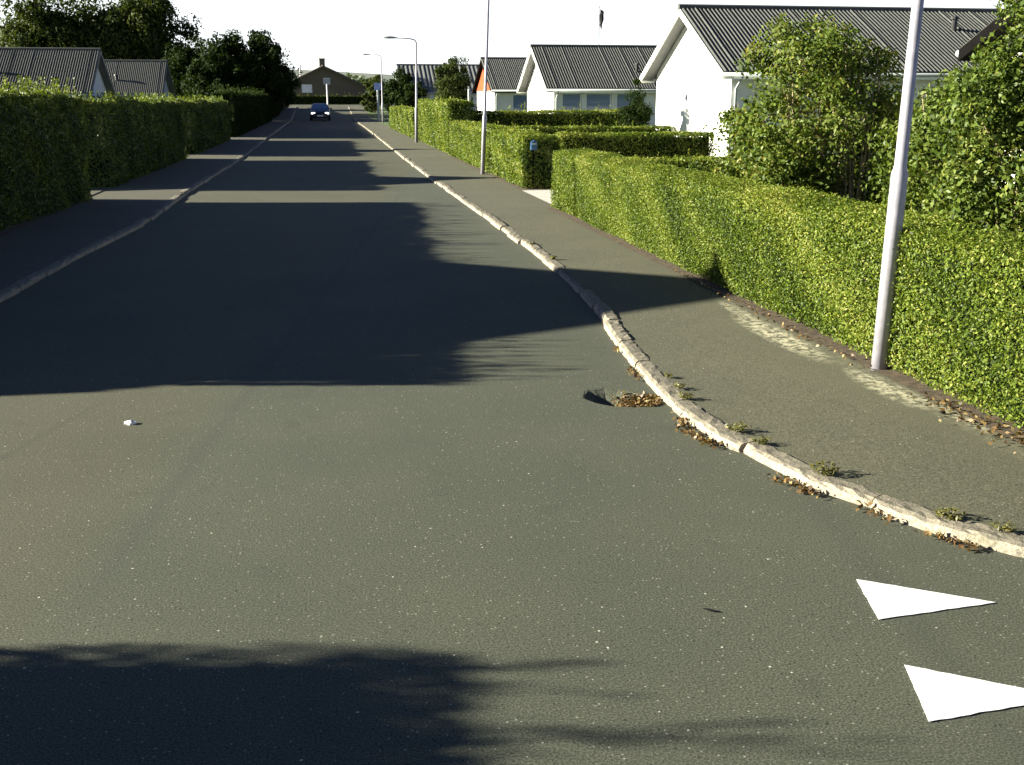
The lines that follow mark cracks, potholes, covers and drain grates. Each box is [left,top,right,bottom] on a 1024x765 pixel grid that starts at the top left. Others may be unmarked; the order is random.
pothole [582,388,652,407]
